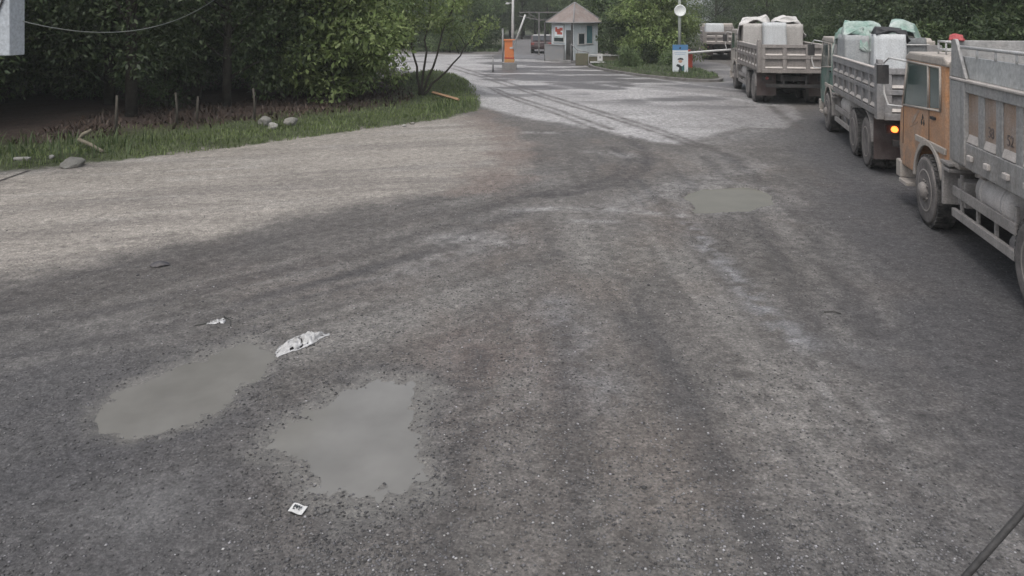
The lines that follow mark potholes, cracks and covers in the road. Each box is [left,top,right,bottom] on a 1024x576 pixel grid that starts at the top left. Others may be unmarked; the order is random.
pothole [59,324,304,457]
pothole [675,183,795,218]
pothole [225,362,468,550]
